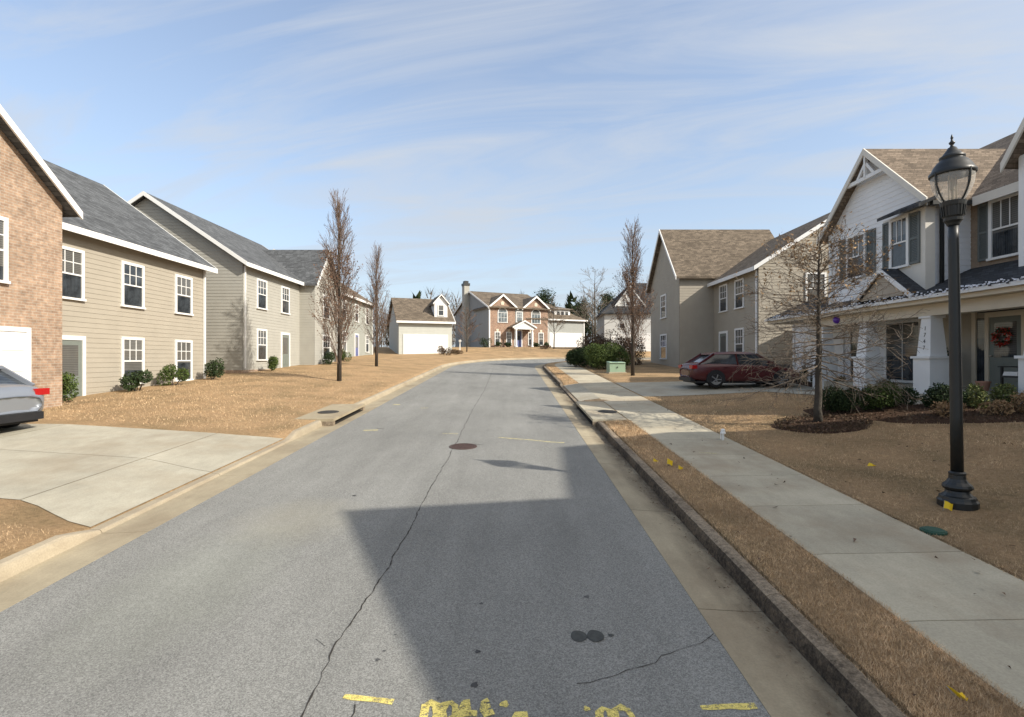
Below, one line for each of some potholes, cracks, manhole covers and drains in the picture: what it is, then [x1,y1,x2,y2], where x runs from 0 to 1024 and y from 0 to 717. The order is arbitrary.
crack [577,633,717,684]
drain grate [576,401,627,427]
drain grate [296,404,365,426]
